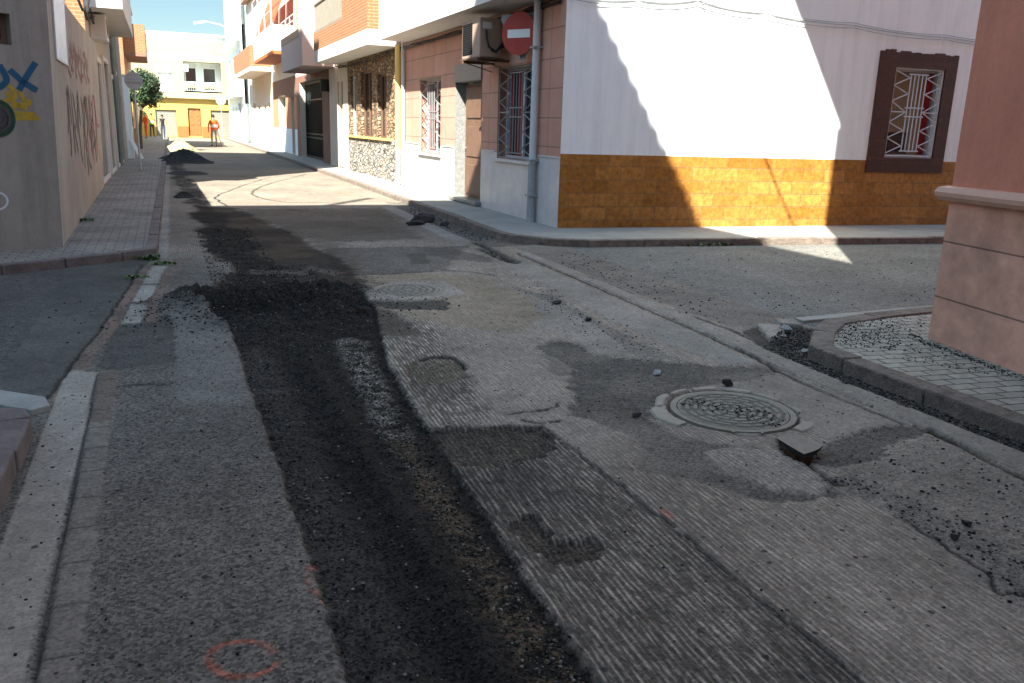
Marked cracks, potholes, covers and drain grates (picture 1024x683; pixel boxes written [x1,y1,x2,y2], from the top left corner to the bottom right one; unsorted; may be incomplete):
manhole cover [651,387,814,437]
manhole cover [374,283,443,297]
